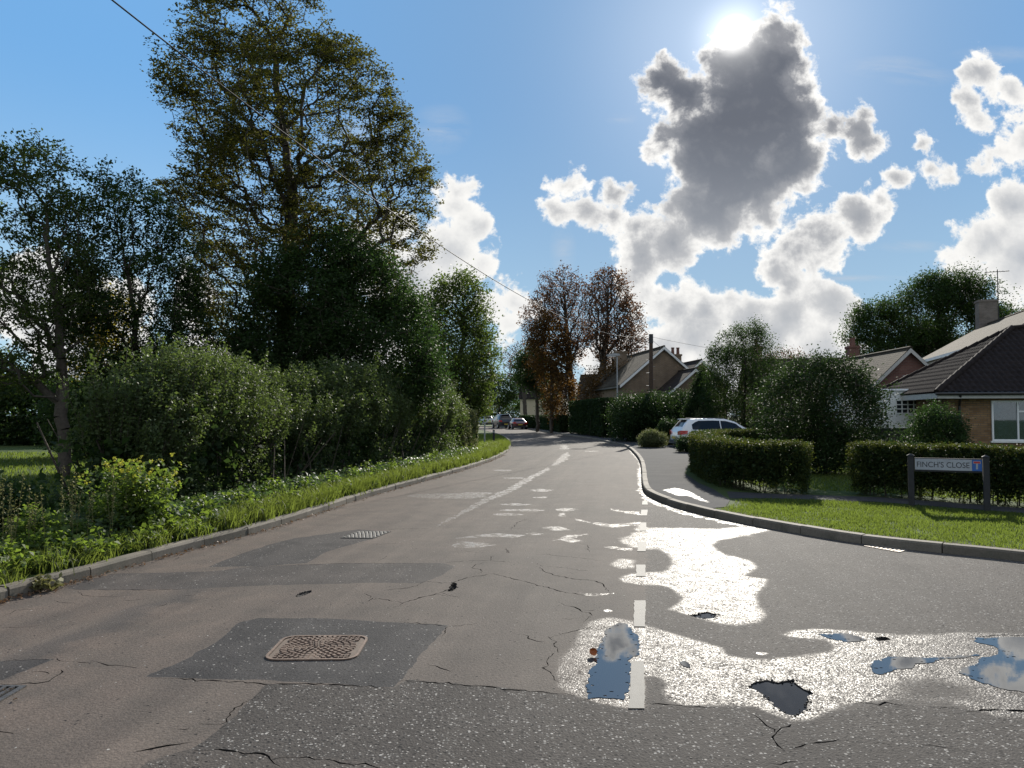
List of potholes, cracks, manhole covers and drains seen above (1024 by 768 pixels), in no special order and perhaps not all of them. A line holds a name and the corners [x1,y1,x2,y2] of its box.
crack [366,547,609,682]
manhole cover [265,635,368,661]
crack [755,715,838,765]
crack [137,678,388,768]
drain grate [0,685,27,702]
pothole [747,678,816,717]
crack [0,659,135,685]
